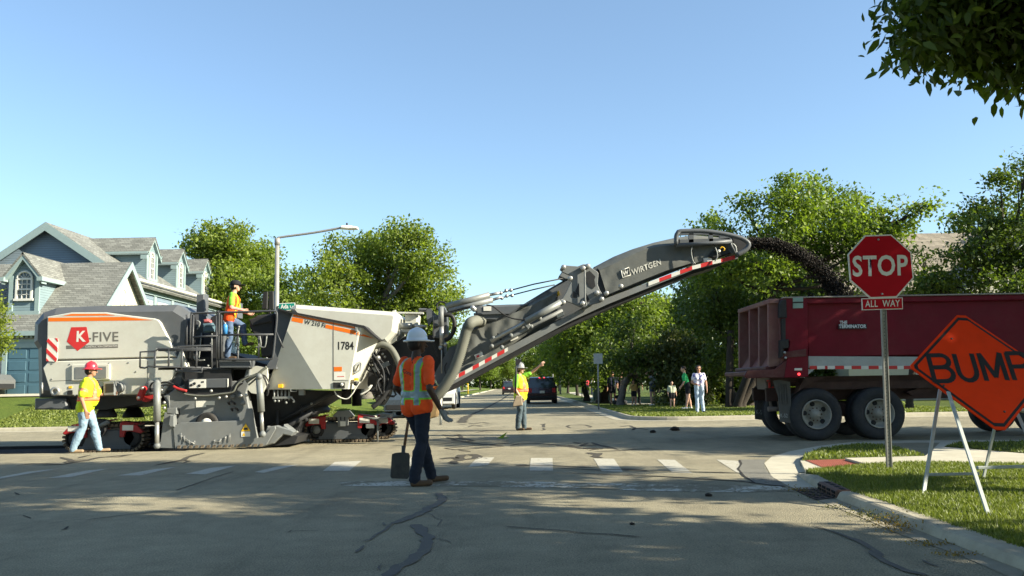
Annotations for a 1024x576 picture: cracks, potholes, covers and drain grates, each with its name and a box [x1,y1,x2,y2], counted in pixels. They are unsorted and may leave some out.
crack [509,526,640,537]
drain grate [794,481,851,500]
